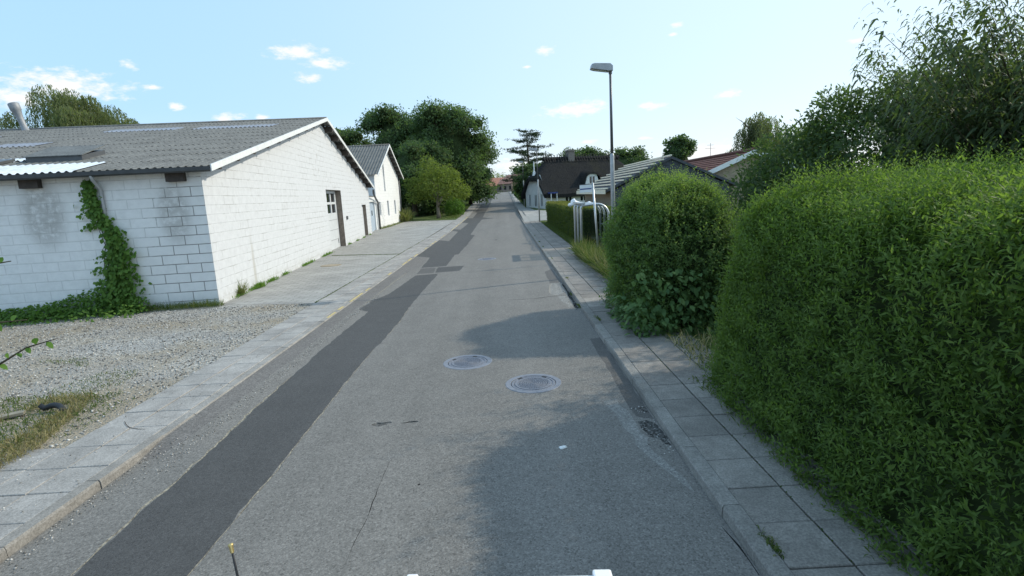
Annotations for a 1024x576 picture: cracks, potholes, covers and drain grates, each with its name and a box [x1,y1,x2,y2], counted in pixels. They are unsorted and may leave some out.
crack [347,461,390,559]
manhole cover [443,355,492,370]
manhole cover [505,374,562,393]
